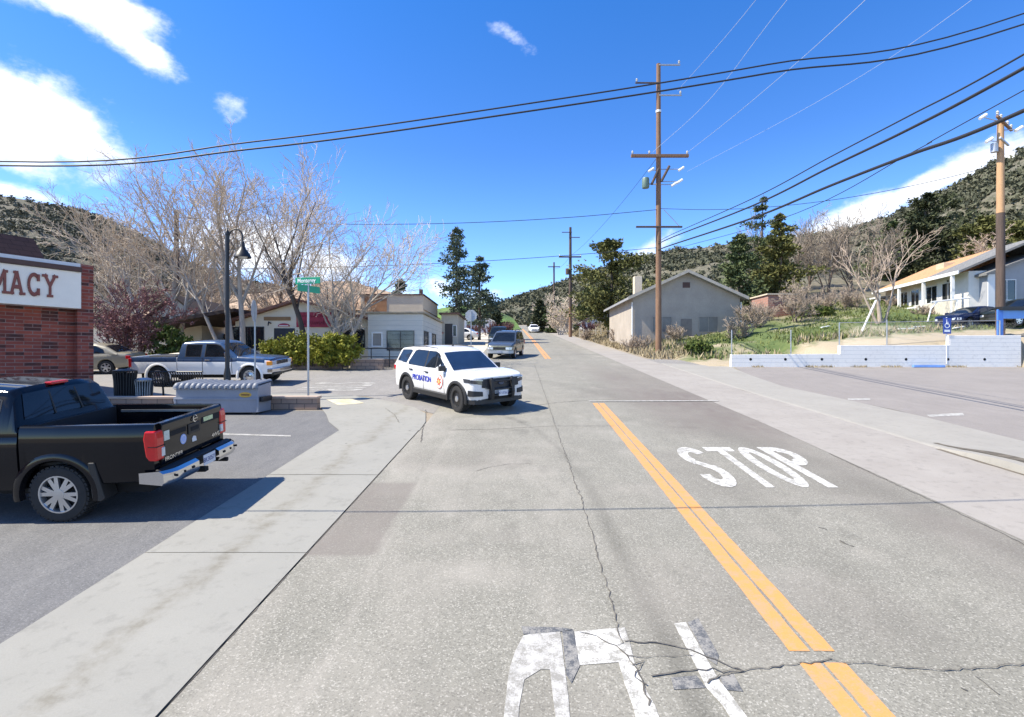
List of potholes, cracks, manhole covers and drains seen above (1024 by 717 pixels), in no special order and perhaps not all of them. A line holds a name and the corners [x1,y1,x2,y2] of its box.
crack [467,367,1024,705]
